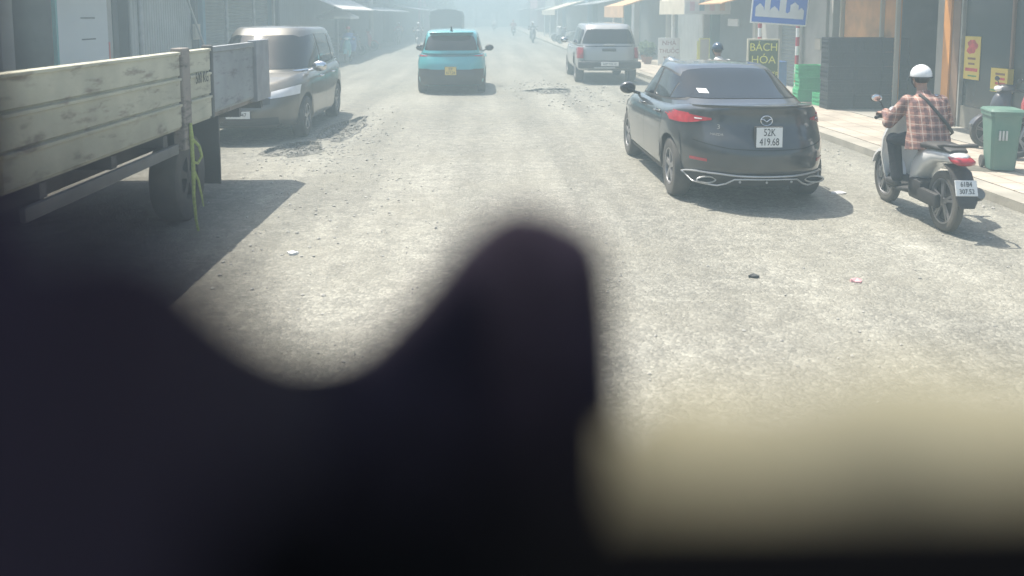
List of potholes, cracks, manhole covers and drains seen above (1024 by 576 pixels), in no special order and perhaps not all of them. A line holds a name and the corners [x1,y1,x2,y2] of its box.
pothole [259,141,326,158]
pothole [316,116,368,142]
